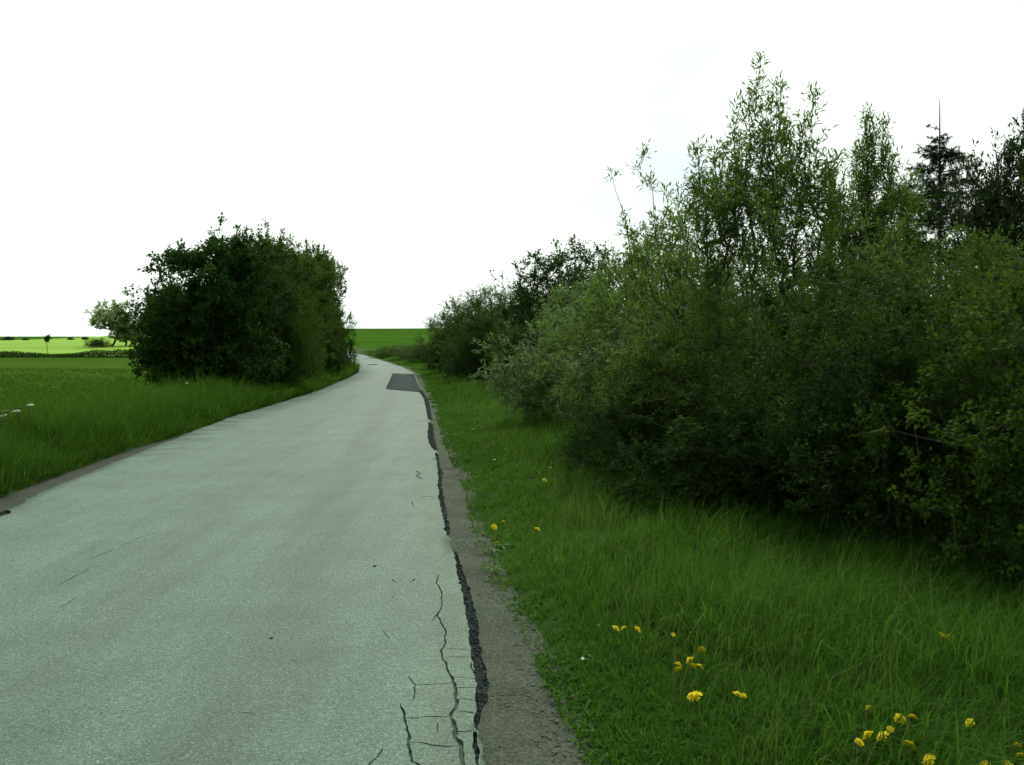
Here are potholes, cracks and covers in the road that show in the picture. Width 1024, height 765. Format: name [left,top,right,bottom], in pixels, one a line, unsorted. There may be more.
crack [400,574,477,765]
